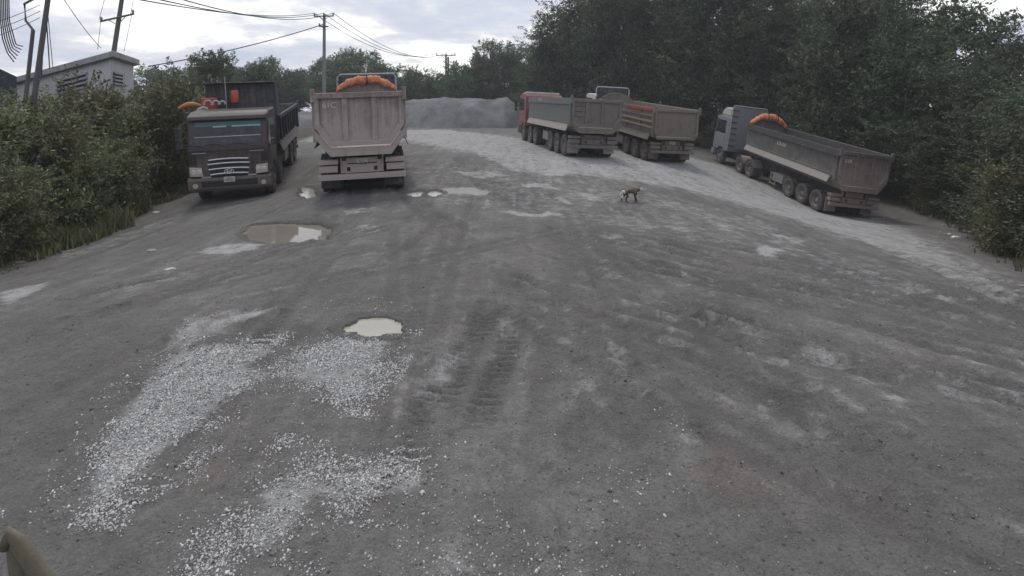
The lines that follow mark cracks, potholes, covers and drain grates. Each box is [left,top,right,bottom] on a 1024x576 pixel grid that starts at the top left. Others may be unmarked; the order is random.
pothole [235,219,341,244]
pothole [422,188,448,199]
pothole [402,189,430,198]
pothole [326,310,418,342]
pothole [293,185,324,198]
